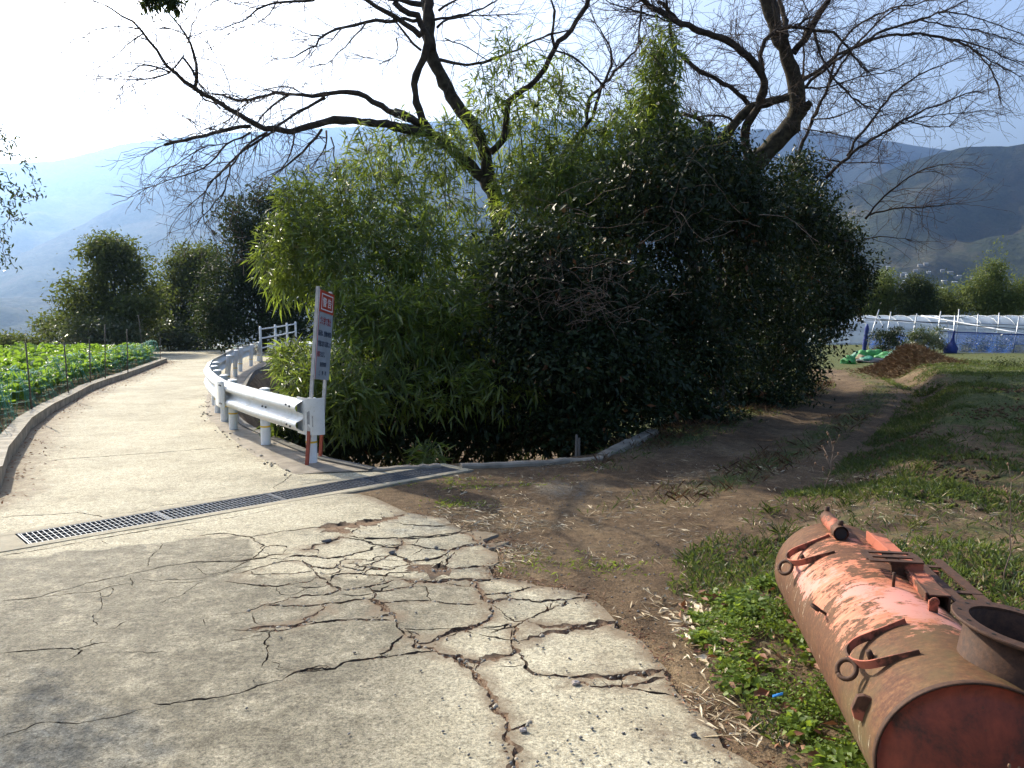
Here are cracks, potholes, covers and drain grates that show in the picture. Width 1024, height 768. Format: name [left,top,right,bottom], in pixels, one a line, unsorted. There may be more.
drain grate [17,512,170,544]
drain grate [361,466,457,484]
crack [2,514,673,768]
drain grate [268,478,379,500]
drain grate [155,493,284,520]
